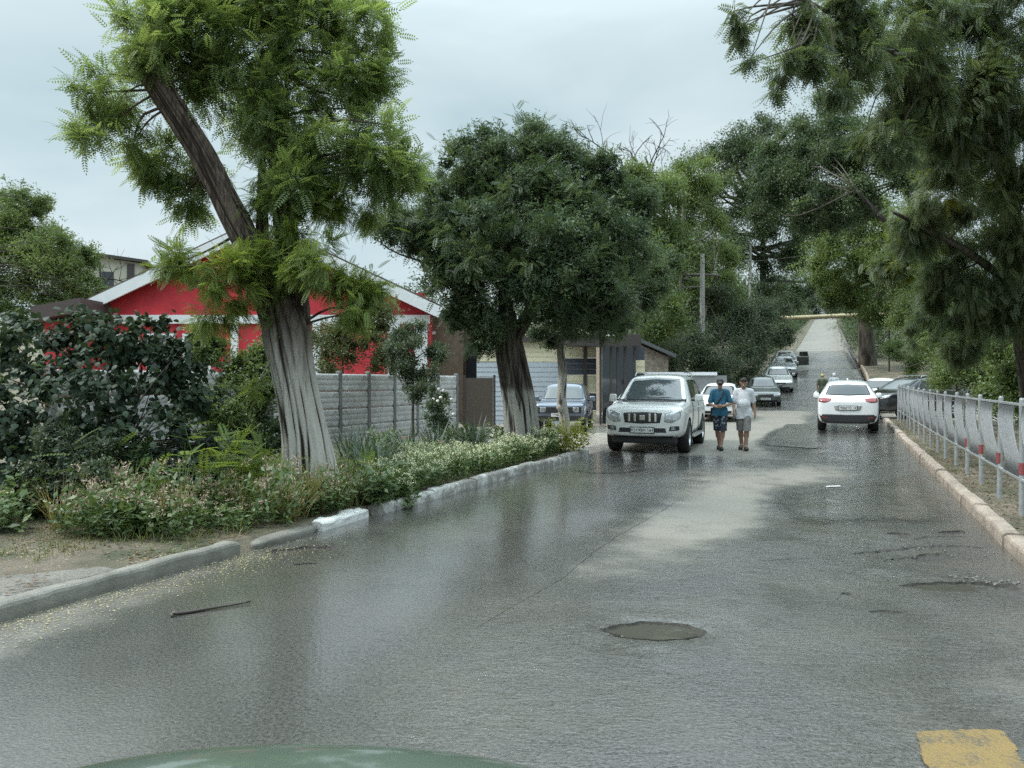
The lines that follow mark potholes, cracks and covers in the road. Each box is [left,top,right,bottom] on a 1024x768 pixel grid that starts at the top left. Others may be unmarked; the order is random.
pothole [899,581,1022,592]
crack [851,535,983,561]
